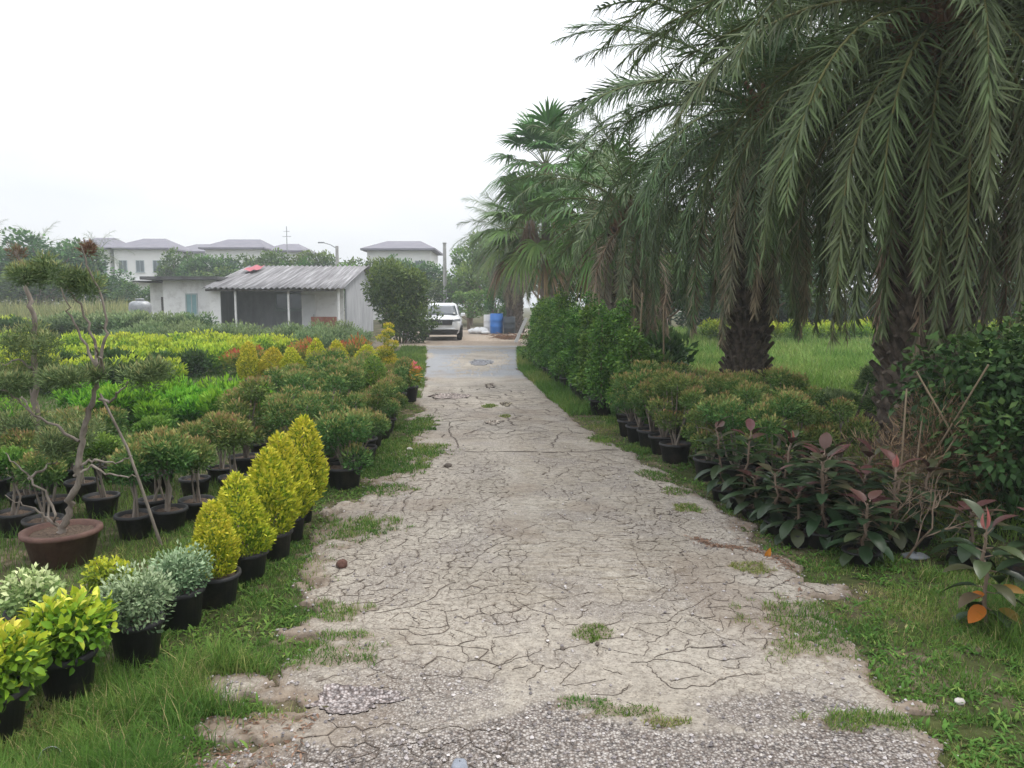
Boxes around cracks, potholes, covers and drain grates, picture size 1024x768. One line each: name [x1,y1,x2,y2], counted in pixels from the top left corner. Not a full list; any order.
pothole [304,683,406,715]
crack [296,385,851,768]
